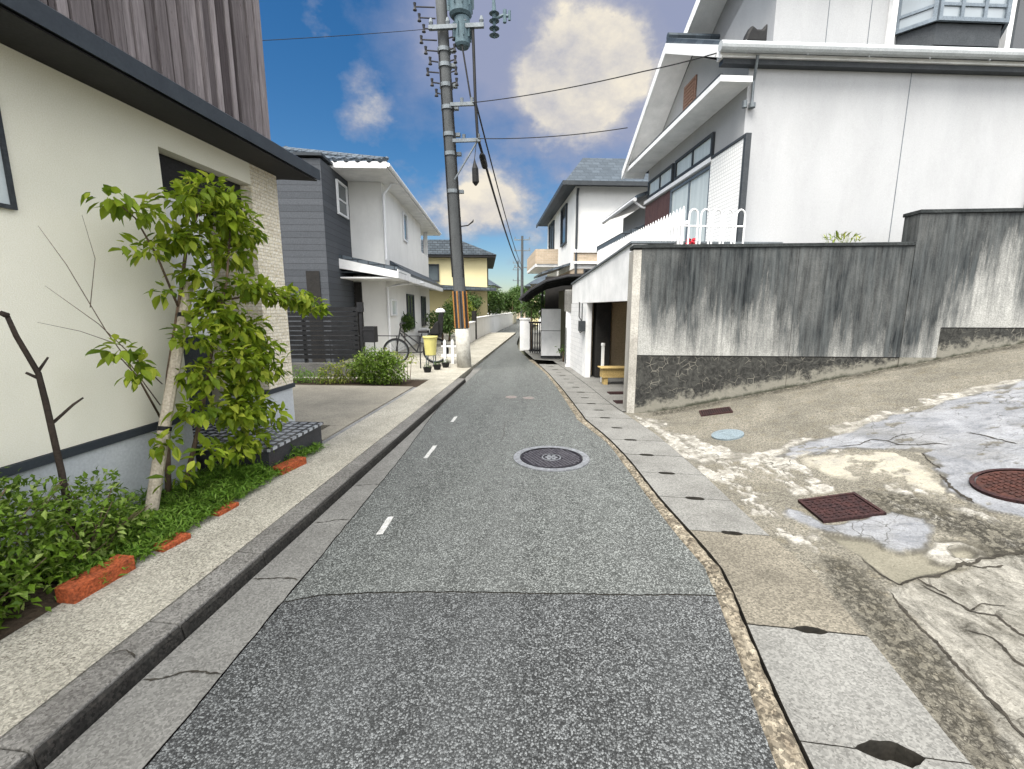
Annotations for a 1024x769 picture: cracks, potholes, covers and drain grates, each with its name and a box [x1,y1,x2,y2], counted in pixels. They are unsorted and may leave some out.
manhole cover [513,446,590,472]
utility cover [798,492,887,524]
crack [109,649,221,681]
crack [836,432,973,502]
drain grate [699,406,733,417]
crack [861,551,1024,737]
manhole cover [969,468,1024,504]
